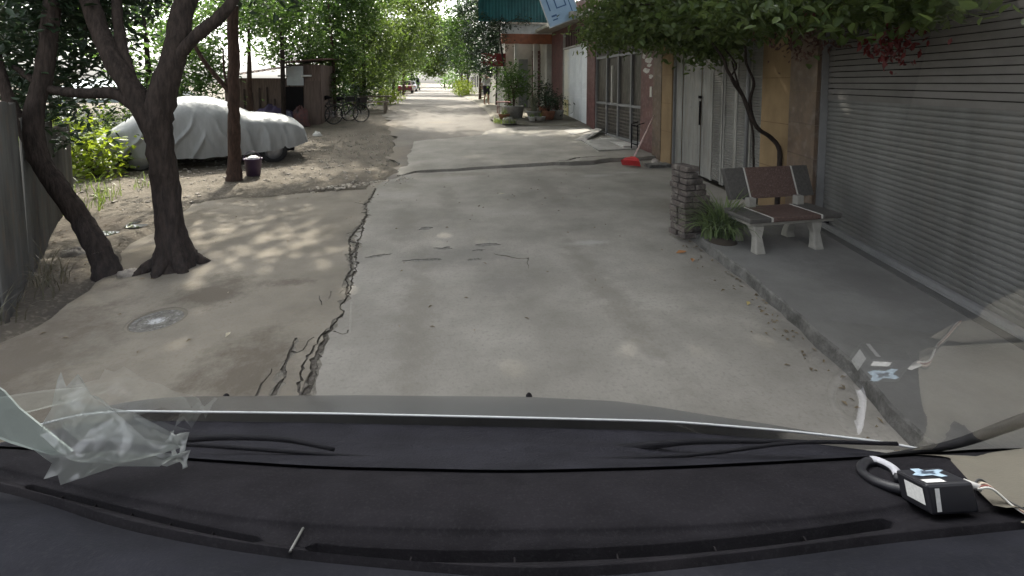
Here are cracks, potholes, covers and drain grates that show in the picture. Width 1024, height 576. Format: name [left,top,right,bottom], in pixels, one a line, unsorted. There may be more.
manhole cover [124,308,188,334]
crack [255,188,377,396]
